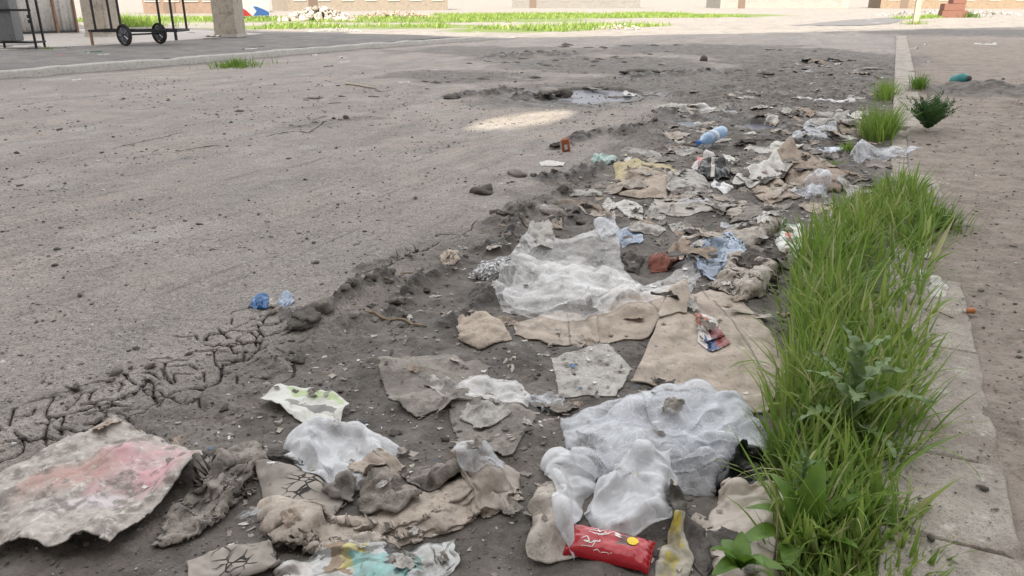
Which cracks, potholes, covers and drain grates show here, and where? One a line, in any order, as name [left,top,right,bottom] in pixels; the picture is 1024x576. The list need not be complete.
pothole [521,83,657,105]
